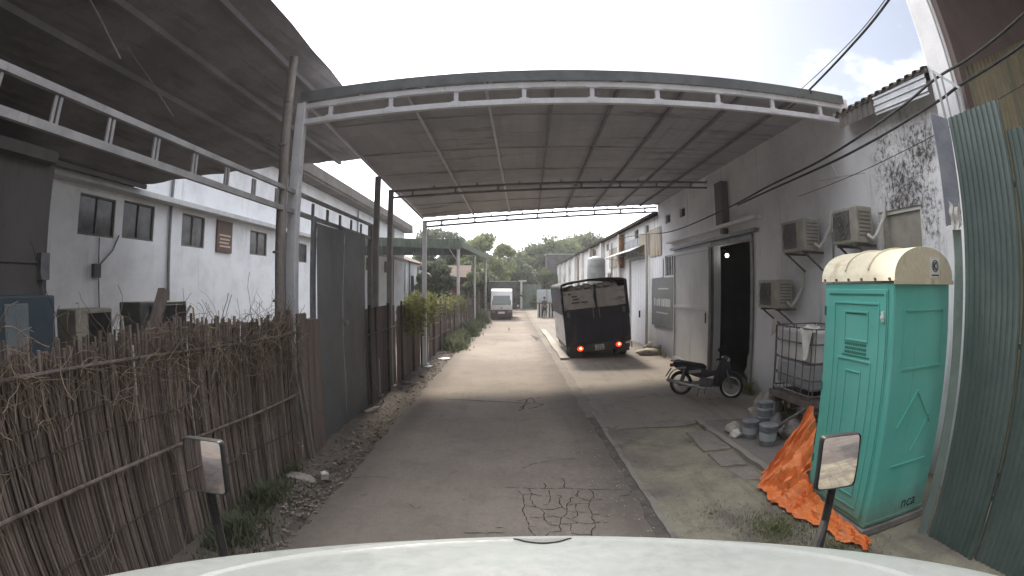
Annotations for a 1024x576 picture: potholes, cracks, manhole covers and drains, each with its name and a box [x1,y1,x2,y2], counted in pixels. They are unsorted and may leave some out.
crack [509,478,635,536]
crack [454,397,544,411]
